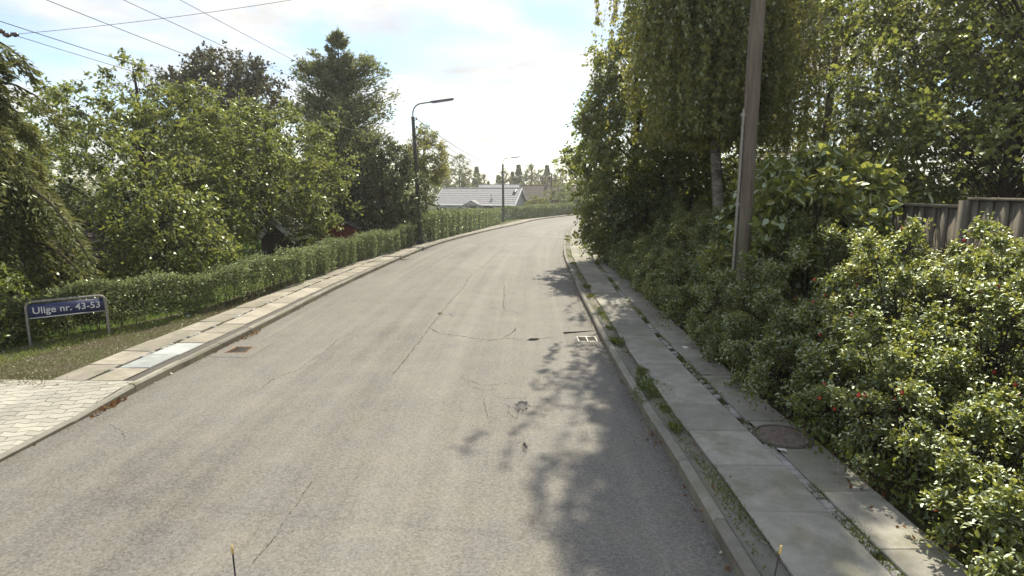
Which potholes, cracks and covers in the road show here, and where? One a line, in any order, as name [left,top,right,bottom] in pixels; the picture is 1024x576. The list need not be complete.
manhole cover [752,424,814,450]
pothole [512,400,531,413]
